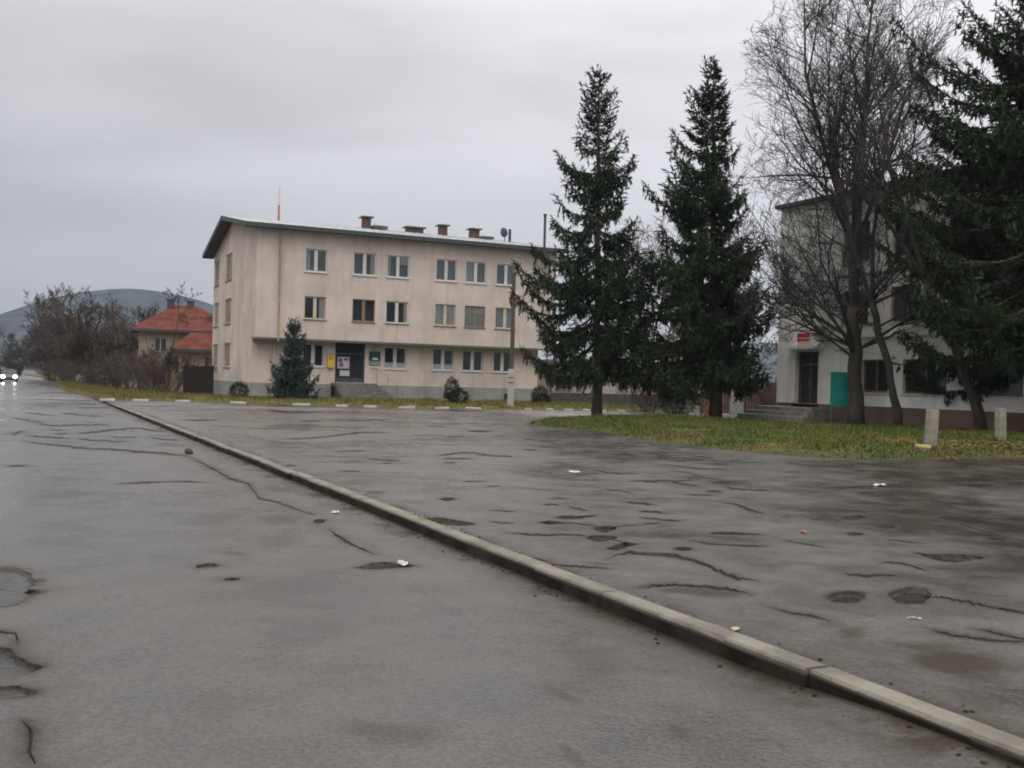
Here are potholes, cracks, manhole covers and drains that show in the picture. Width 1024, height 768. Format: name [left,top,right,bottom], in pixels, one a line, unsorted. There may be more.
pothole [915,552,986,563]
crack [925,596,1024,643]
crack [22,721,36,764]
pothole [827,591,865,603]
crack [843,562,927,577]
pothole [431,517,476,526]
crack [14,405,371,553]
pothole [0,567,41,606]
crack [493,455,766,595]
pothole [888,586,932,604]
